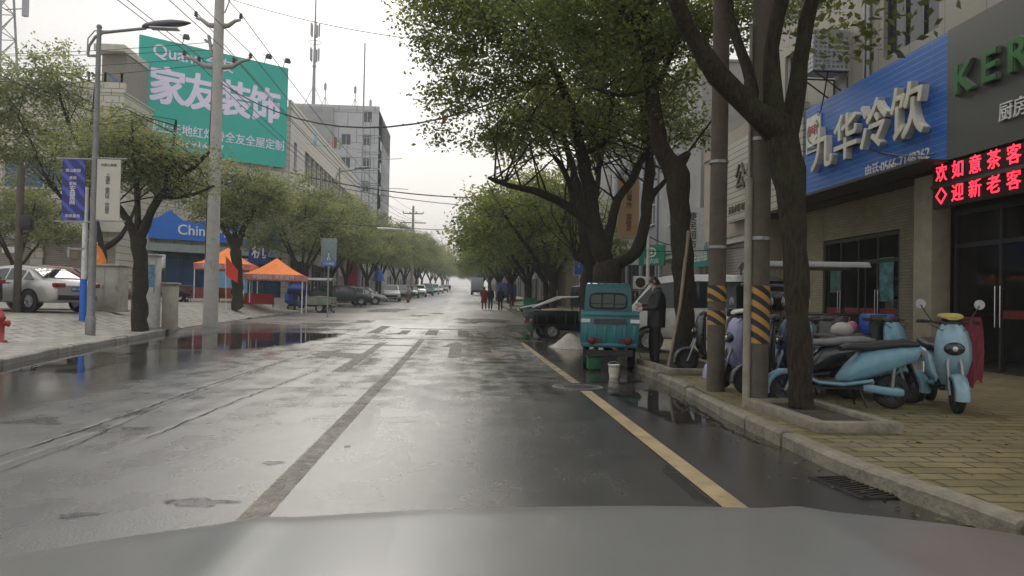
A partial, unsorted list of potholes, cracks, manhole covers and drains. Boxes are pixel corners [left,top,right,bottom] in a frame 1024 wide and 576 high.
drain grate [808,475,898,500]
